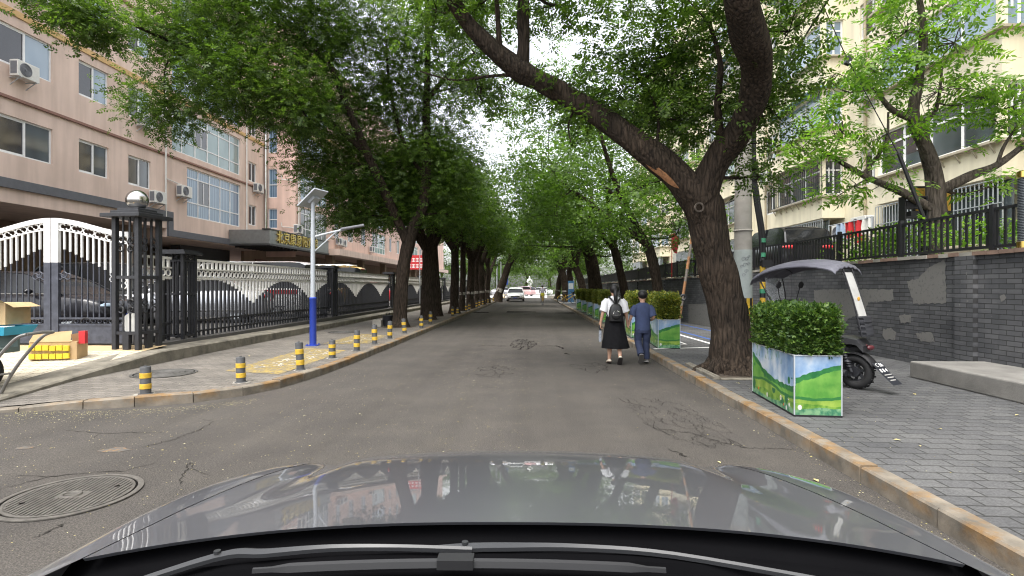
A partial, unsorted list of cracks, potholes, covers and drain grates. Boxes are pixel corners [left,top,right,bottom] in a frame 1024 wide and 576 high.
crack [2,418,214,489]
crack [619,398,785,457]
crack [475,339,537,378]
manhole cover [129,368,198,378]
manhole cover [0,474,144,522]
